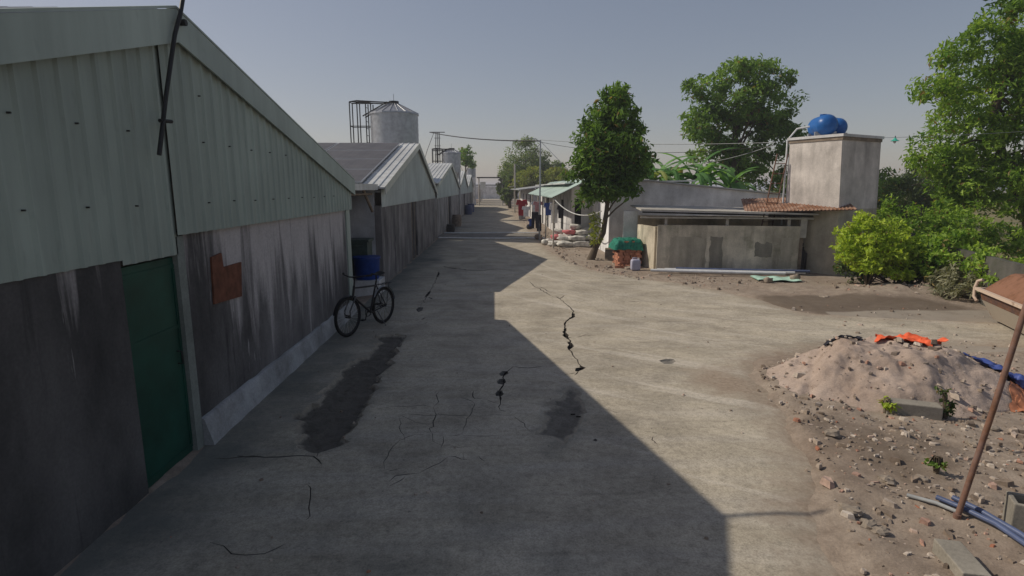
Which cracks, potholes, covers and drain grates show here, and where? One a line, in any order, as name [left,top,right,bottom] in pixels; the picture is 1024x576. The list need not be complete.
crack [217,451,321,464]
crack [530,278,591,375]
crack [498,366,541,411]
crack [210,542,310,555]
crack [383,391,531,494]
